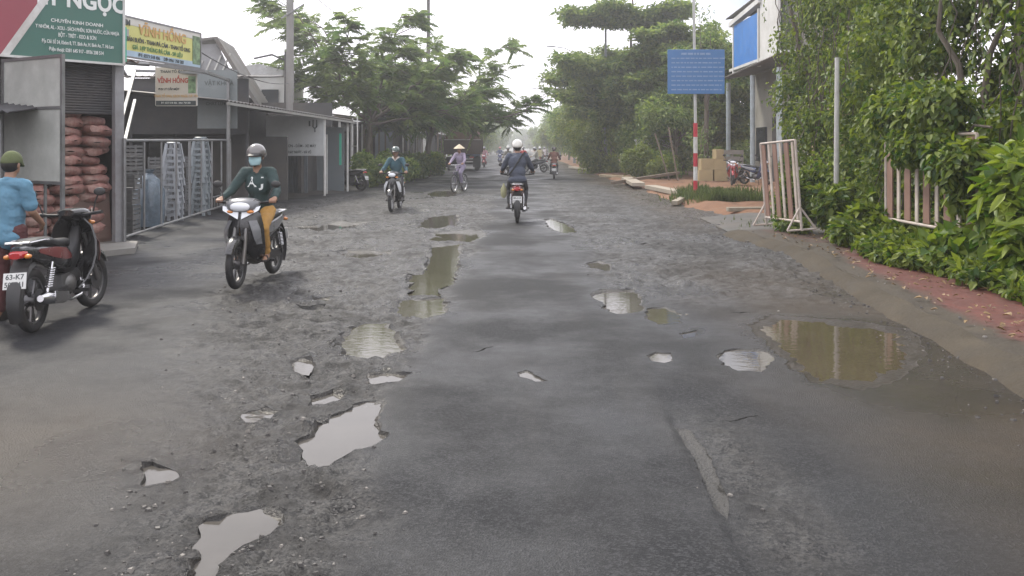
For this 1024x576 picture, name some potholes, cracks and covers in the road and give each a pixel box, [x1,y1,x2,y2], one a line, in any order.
pothole [332,322,407,359]
pothole [646,352,673,363]
pothole [517,370,547,382]
pothole [366,371,413,384]
pothole [295,398,389,467]
pothole [240,406,280,422]
pothole [544,218,577,233]
pothole [308,386,348,406]
pothole [747,315,928,390]
pothole [186,506,288,576]
pothole [290,355,316,378]
pothole [140,461,180,486]
